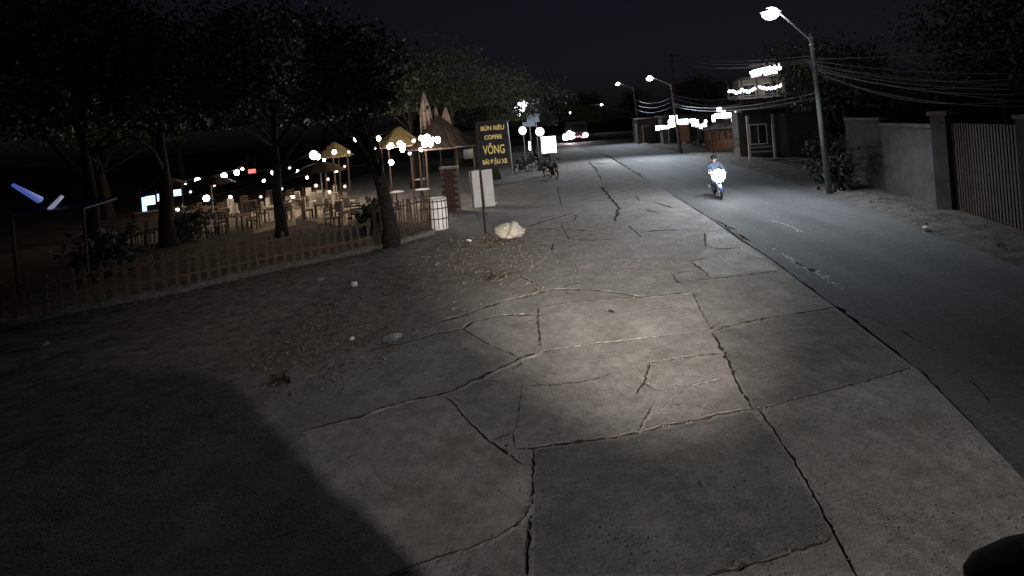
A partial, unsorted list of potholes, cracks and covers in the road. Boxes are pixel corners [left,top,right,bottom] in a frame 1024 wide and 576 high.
crack [300,148,1000,576]
